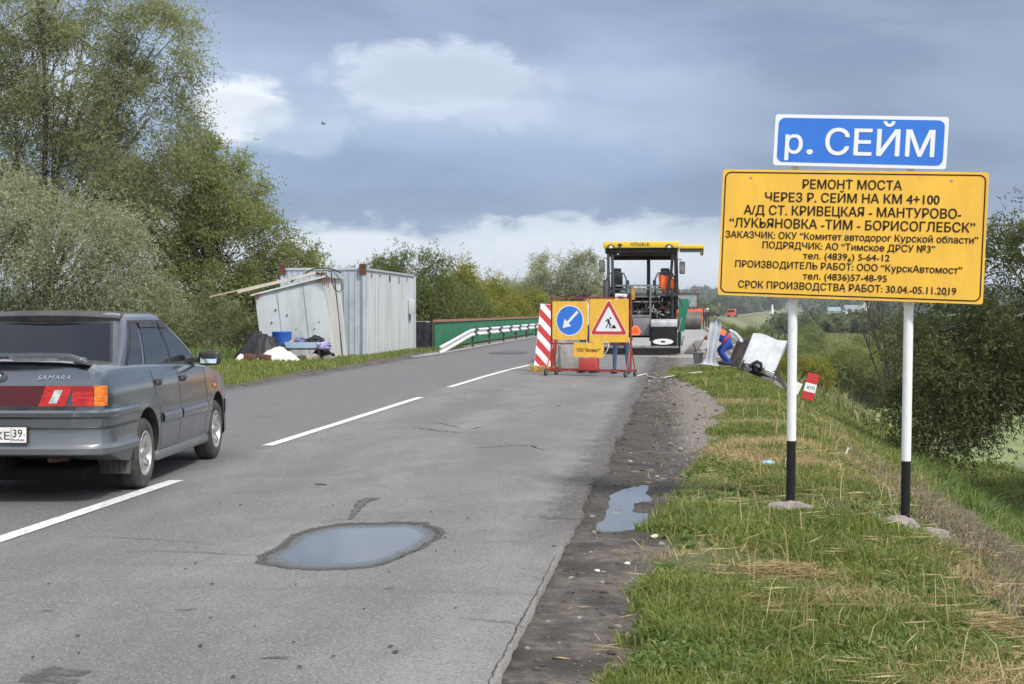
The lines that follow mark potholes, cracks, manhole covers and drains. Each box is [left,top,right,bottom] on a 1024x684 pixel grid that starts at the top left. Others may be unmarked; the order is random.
crack [414,422,544,450]
pothole [255,521,445,570]
